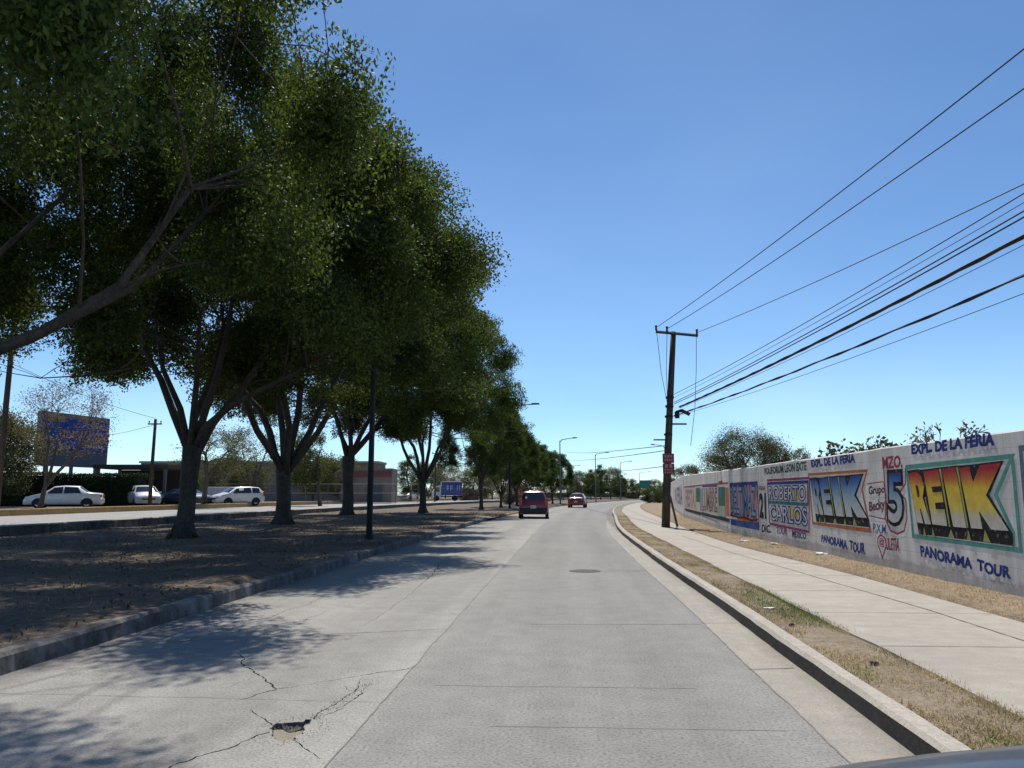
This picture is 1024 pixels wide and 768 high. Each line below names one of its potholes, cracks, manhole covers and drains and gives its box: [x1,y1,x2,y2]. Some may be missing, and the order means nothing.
crack [168,641,410,768]
pothole [270,719,312,741]
